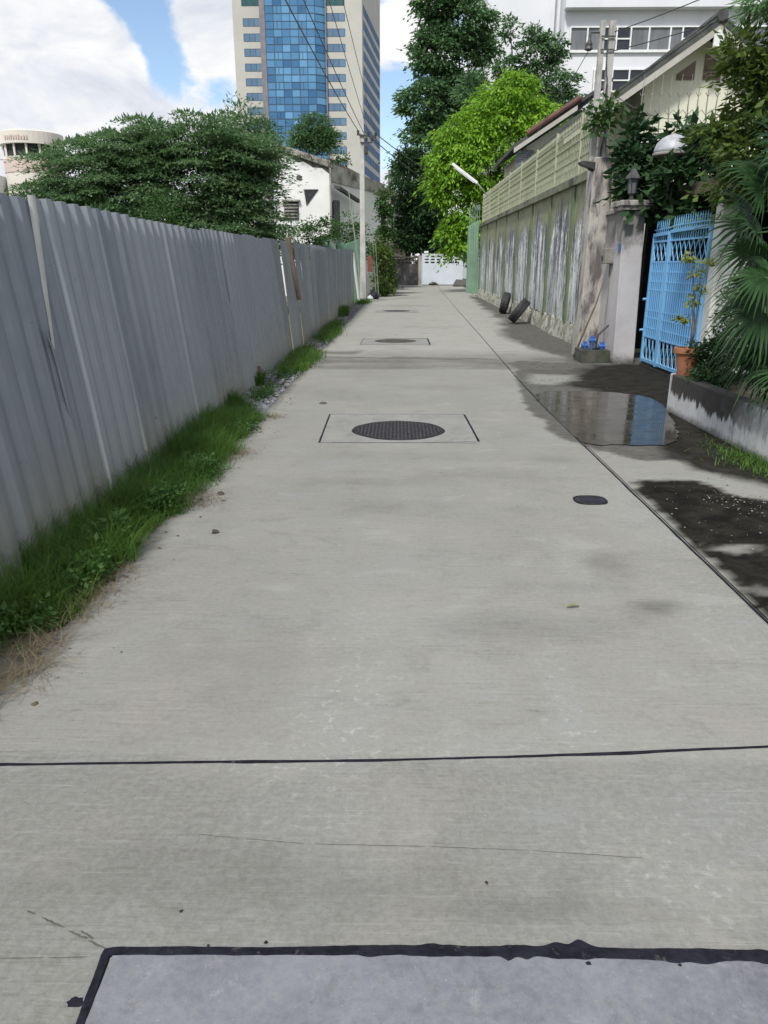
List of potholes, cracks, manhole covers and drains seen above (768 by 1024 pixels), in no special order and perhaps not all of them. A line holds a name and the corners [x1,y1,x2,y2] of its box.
manhole cover [352,421,445,440]
crack [202,834,640,858]
crack [13,910,104,958]
manhole cover [573,495,608,505]
